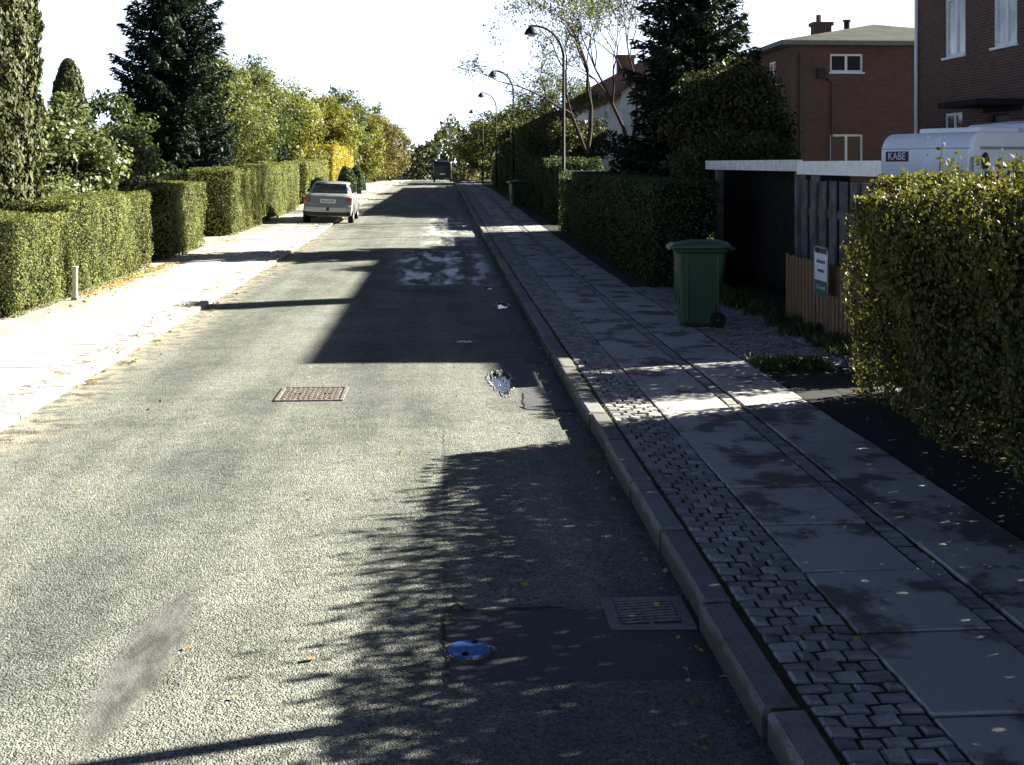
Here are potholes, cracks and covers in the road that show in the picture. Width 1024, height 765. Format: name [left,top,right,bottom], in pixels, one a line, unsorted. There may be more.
pothole [485,369,516,398]
crack [440,603,565,682]
crack [519,393,578,413]
manhole cover [444,639,494,661]
manhole cover [274,386,349,402]
